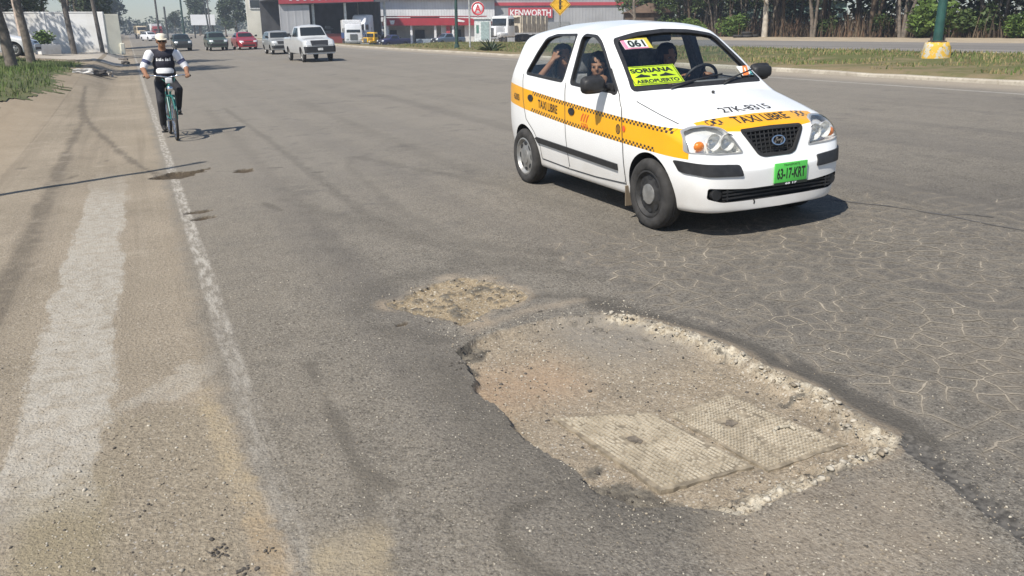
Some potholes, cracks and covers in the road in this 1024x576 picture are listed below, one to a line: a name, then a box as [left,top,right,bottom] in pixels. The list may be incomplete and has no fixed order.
pothole [455,312,902,517]
manhole cover [667,393,848,473]
pothole [384,276,531,326]
crack [545,192,1024,546]
manhole cover [553,412,754,495]
